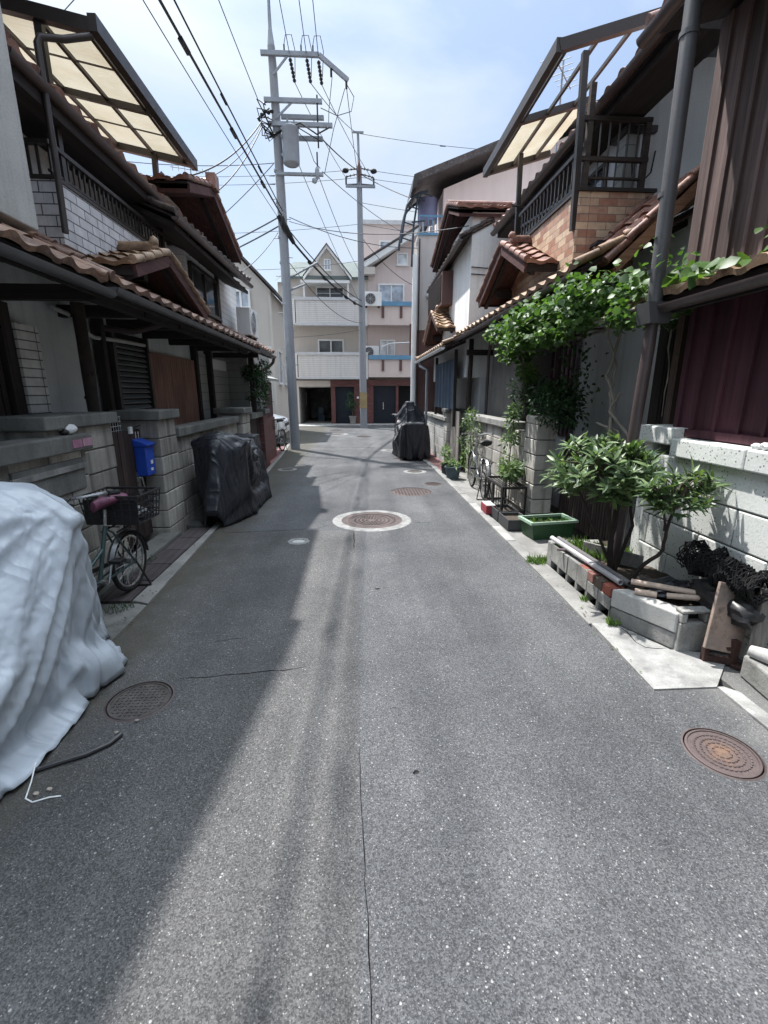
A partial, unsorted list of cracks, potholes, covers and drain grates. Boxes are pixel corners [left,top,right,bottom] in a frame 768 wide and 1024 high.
crack [180,667,302,679]
crack [359,749,372,1024]
manhole cover [391,487,431,496]
manhole cover [332,510,411,531]
manhole cover [103,681,175,722]
manhole cover [680,727,767,781]
